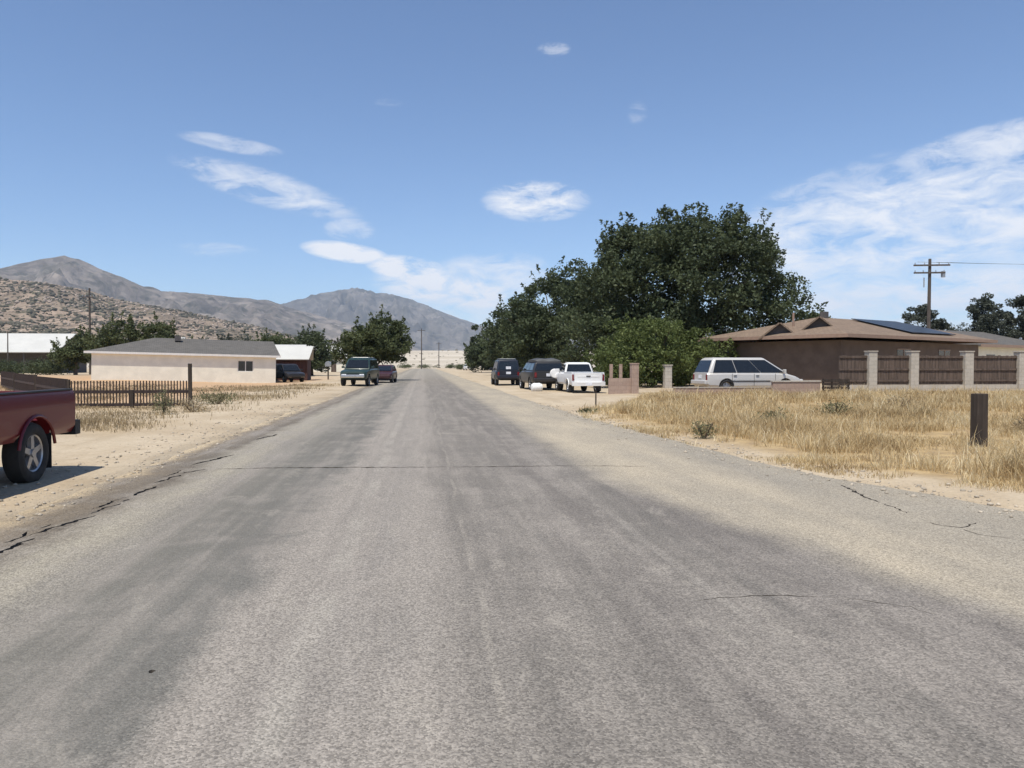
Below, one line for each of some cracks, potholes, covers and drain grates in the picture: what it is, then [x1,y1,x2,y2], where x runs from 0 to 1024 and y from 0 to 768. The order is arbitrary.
crack [696,595,928,613]
crack [0,455,532,553]
crack [841,485,907,513]
